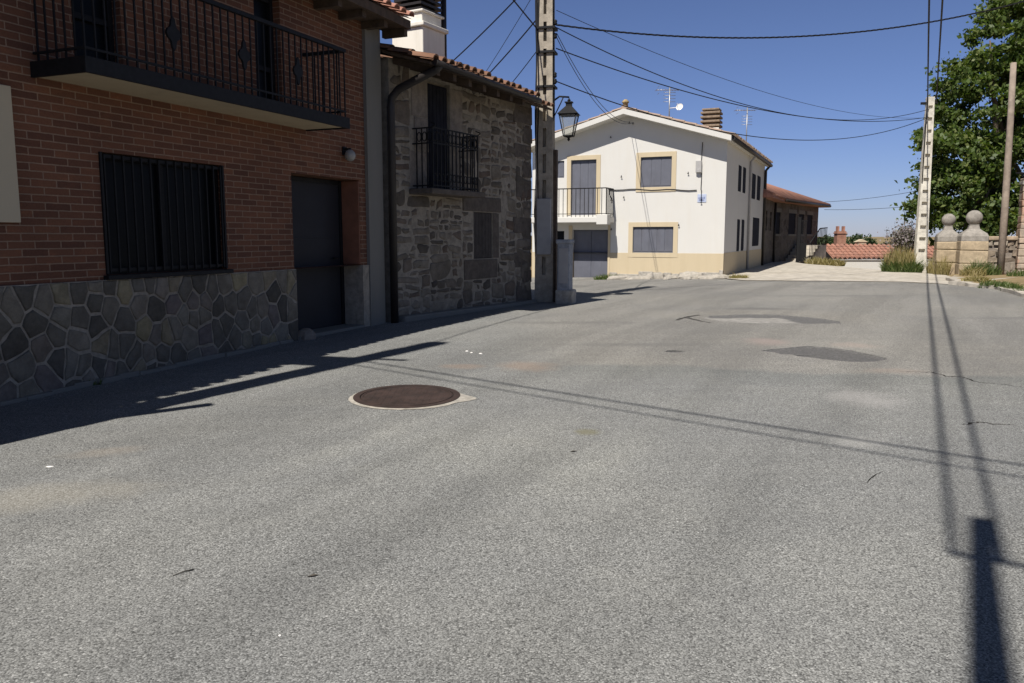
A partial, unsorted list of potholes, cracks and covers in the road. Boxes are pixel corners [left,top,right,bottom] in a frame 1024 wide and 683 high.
crack [677,315,711,323]
manhole cover [348,384,476,410]
crack [901,371,1020,387]
